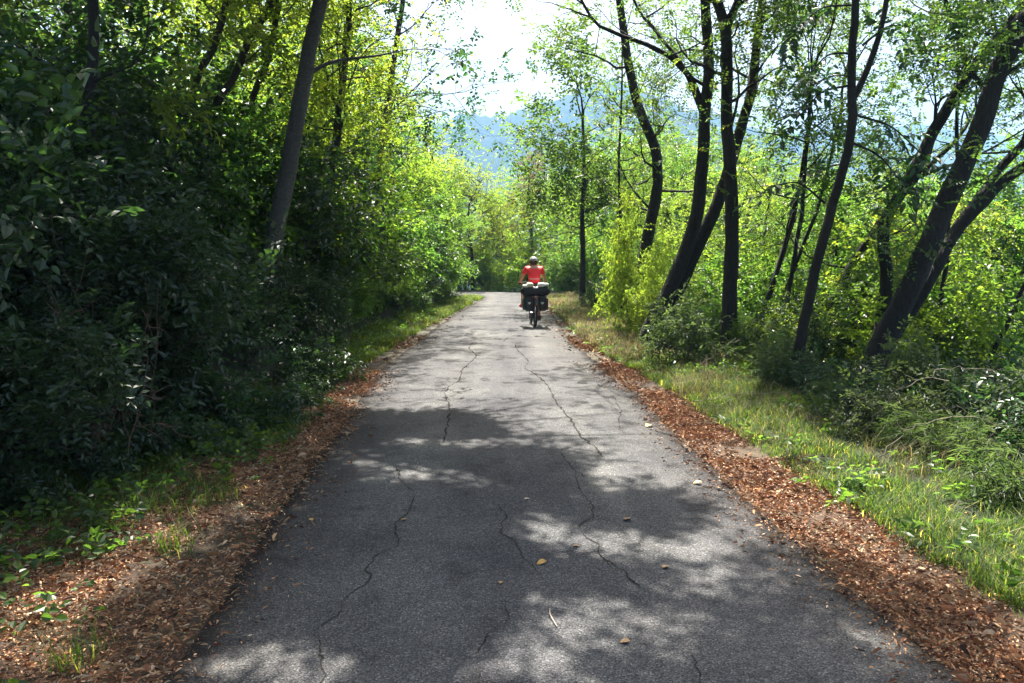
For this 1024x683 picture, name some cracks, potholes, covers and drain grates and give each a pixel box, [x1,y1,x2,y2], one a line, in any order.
crack [314,466,416,683]
crack [498,504,536,570]
crack [478,588,512,683]
crack [443,342,477,442]
crack [505,337,640,587]
